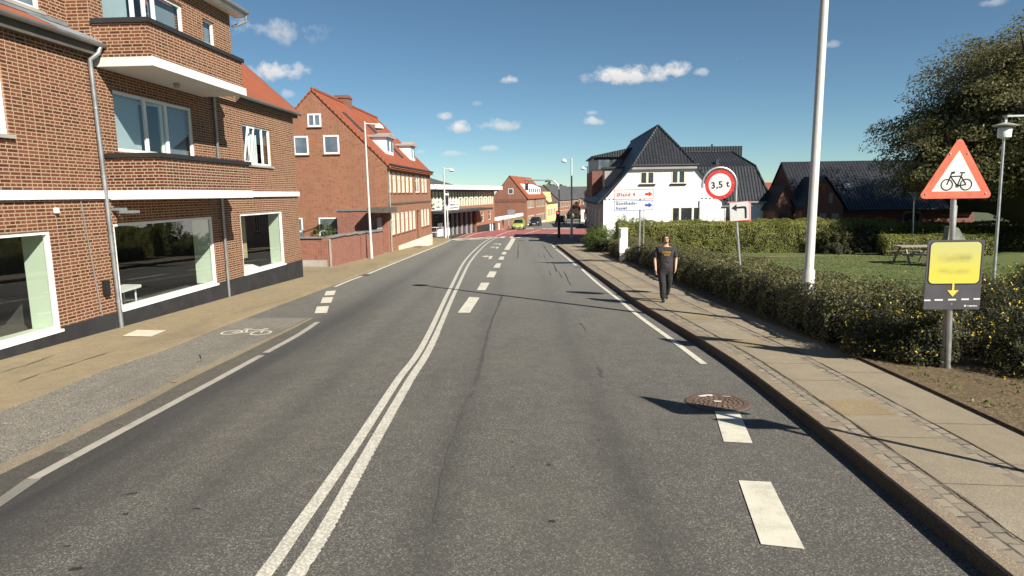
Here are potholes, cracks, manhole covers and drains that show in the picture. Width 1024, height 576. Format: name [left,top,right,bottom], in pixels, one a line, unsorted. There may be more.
manhole cover [685,393,751,412]
